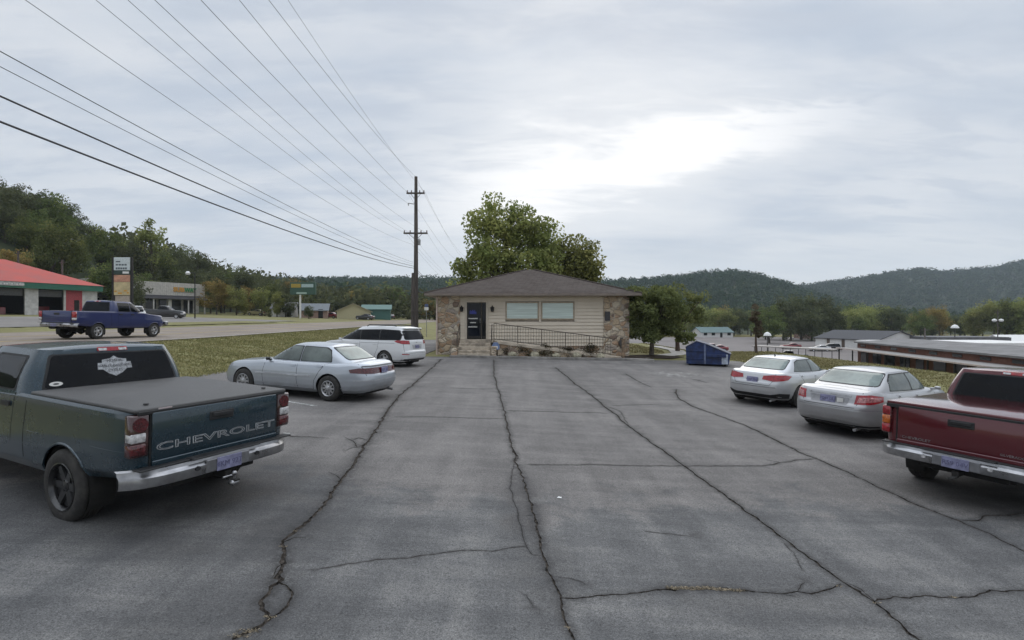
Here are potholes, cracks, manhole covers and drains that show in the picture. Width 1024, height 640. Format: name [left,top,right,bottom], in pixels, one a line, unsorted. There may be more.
crack [227,359,1024,640]
